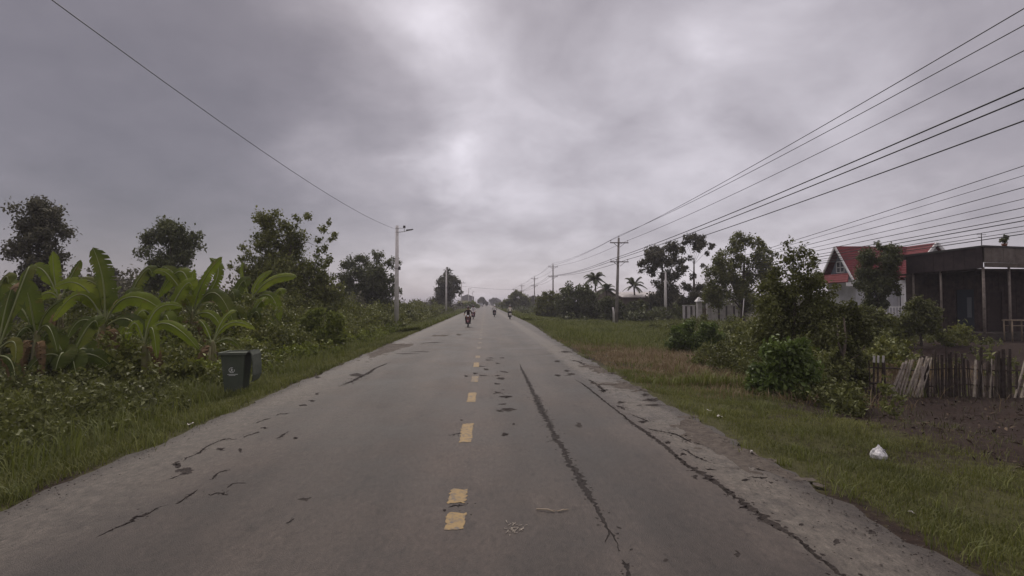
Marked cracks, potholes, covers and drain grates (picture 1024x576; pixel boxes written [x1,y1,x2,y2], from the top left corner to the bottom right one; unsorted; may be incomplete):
crack [567,360,863,576]
crack [99,413,289,536]
